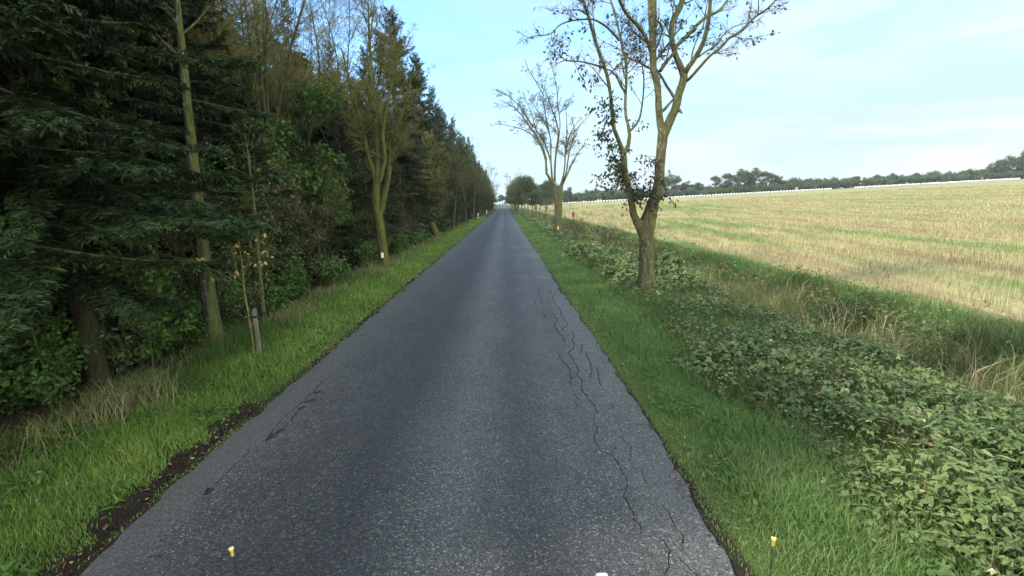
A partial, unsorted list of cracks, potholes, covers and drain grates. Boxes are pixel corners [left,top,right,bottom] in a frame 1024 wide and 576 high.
crack [535,291,698,576]
